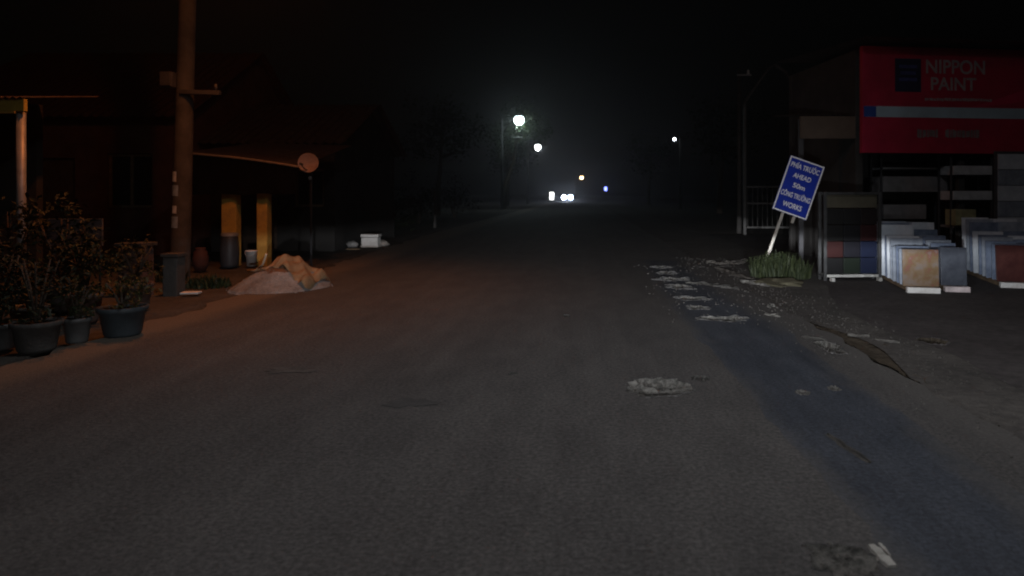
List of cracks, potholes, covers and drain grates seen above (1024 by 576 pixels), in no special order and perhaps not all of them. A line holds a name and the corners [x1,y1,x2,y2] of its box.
pothole [811,340,849,355]
pothole [624,377,696,398]
pothole [914,337,950,351]
pothole [695,314,750,322]
crack [825,433,872,463]
pothole [801,542,883,576]
